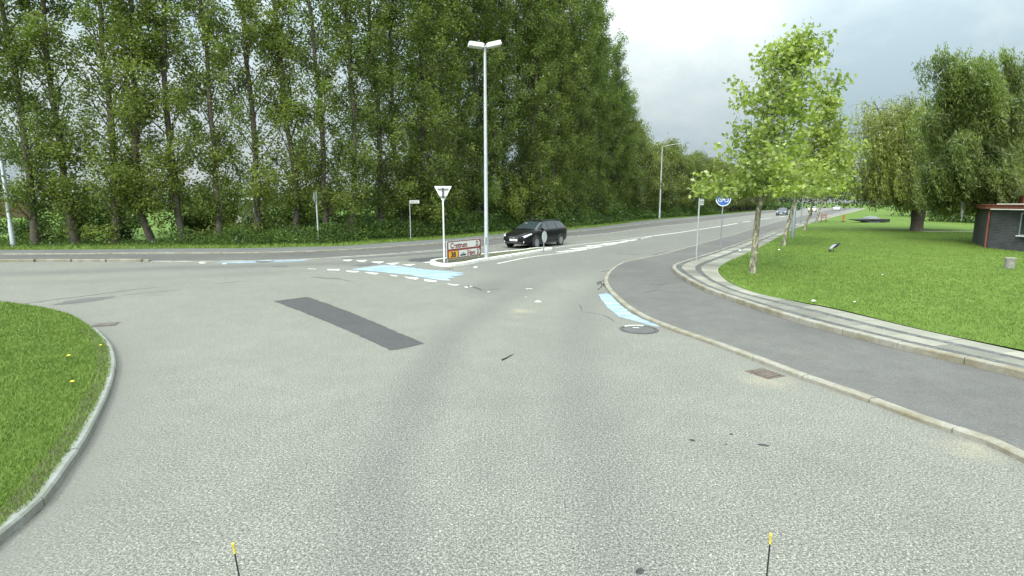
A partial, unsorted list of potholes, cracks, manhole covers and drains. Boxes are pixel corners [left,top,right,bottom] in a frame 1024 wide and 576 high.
manhole cover [619,325,659,334]
crack [580,251,668,321]
